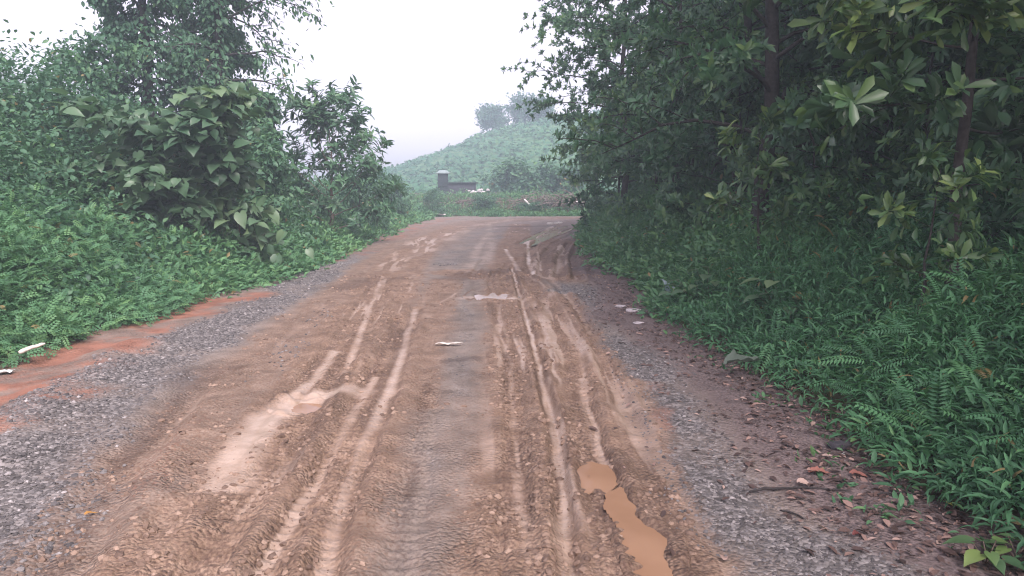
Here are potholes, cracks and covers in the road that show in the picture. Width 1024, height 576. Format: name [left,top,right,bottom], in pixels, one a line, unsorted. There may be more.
pothole [260,391,335,418]
pothole [598,486,698,576]
